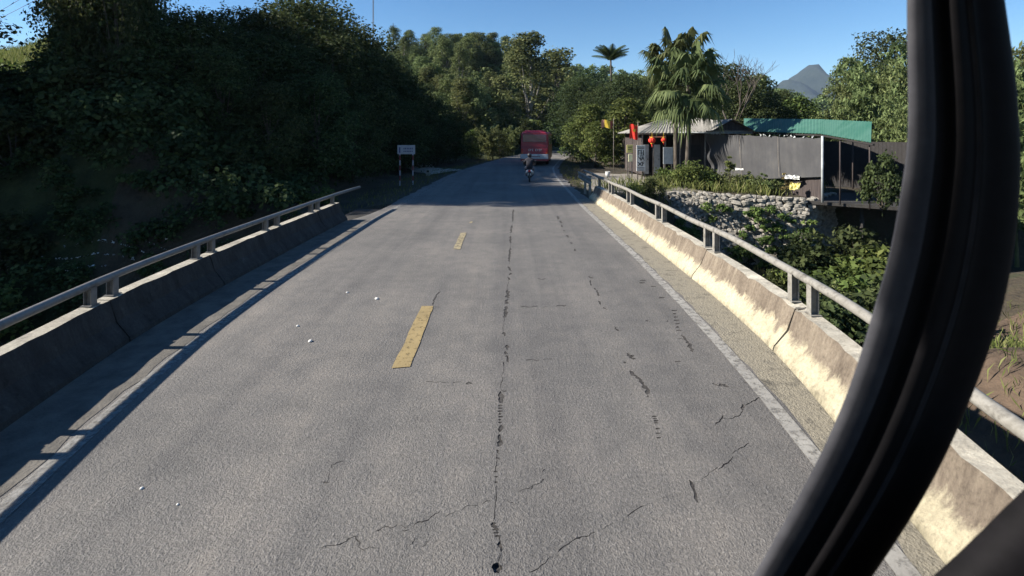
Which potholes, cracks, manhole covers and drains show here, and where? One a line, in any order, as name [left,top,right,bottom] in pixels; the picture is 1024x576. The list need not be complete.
crack [321,469,545,550]
crack [531,443,748,572]
